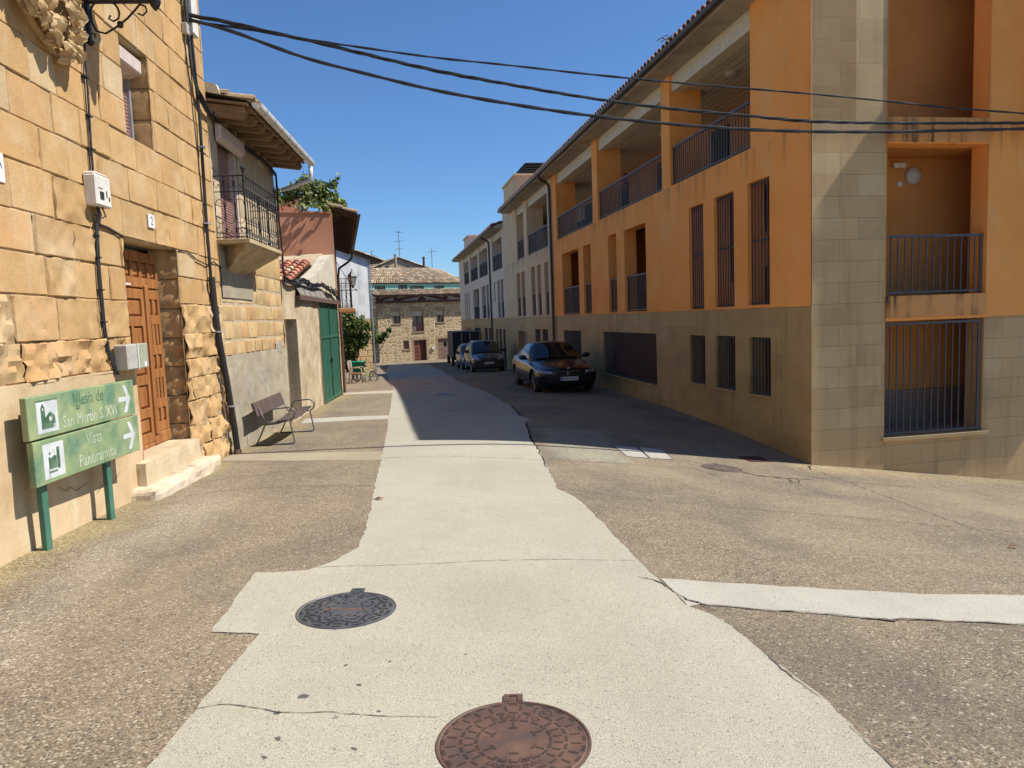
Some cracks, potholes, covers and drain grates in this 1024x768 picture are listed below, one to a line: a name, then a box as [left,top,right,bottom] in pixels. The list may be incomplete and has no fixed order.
manhole cover [295,588,396,629]
manhole cover [435,694,592,768]
crack [638,576,1024,624]
utility cover [613,445,649,458]
manhole cover [701,463,743,473]
utility cover [638,447,673,460]
